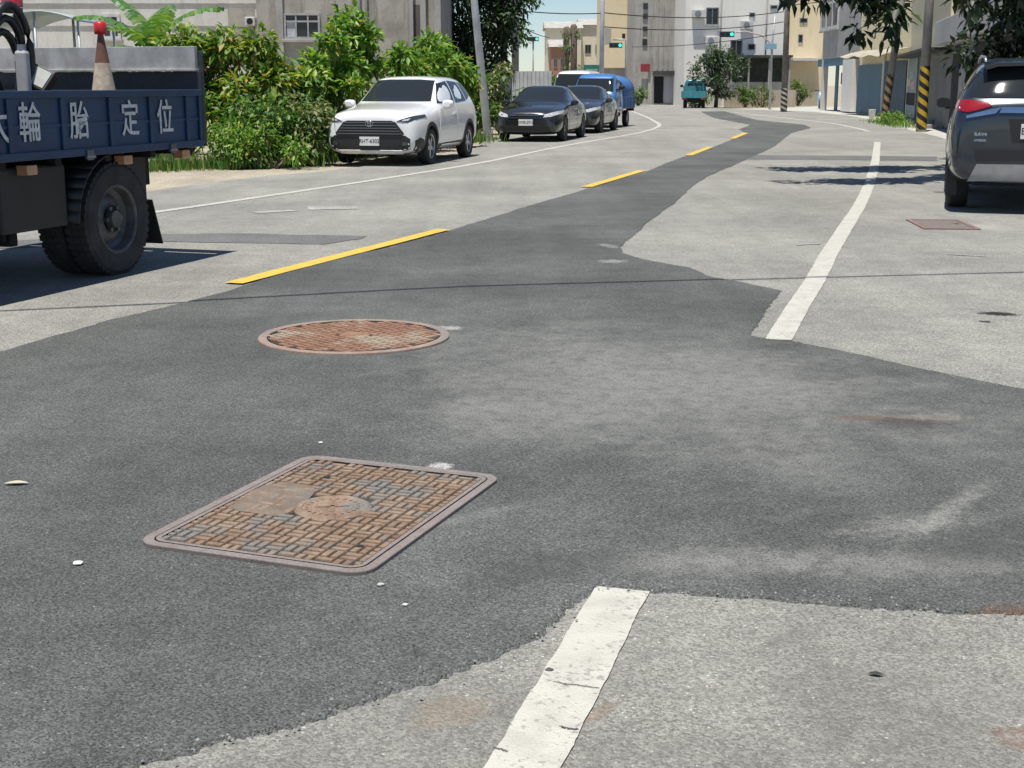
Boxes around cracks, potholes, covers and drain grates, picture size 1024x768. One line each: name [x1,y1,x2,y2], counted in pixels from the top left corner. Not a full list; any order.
manhole cover [258,319,450,356]
manhole cover [906,219,981,230]
manhole cover [143,456,497,576]
